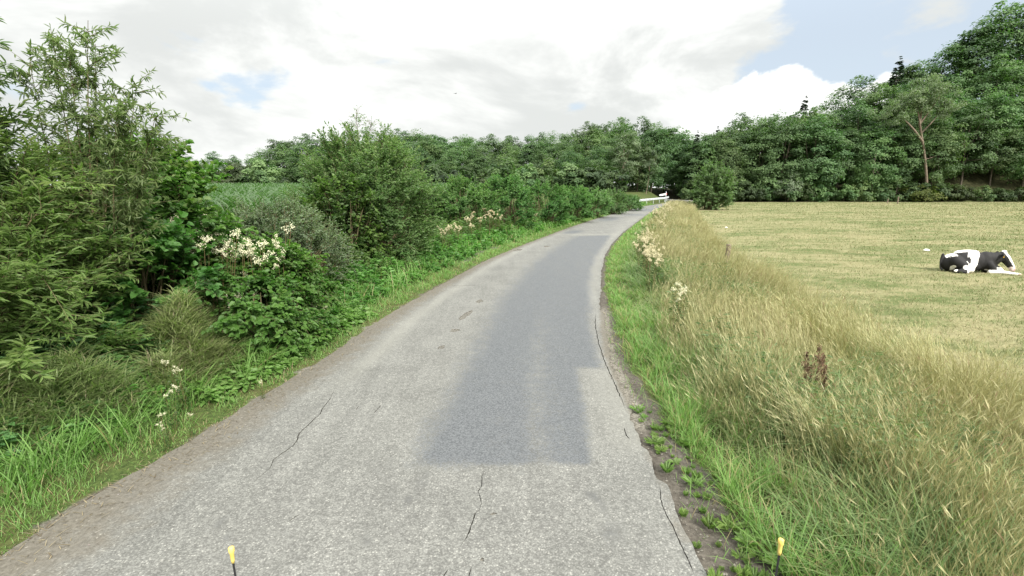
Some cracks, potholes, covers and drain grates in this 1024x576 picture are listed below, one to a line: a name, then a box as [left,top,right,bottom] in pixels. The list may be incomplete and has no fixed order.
crack [258,393,333,478]
crack [464,471,485,541]
crack [658,484,694,573]
crack [595,315,624,405]
